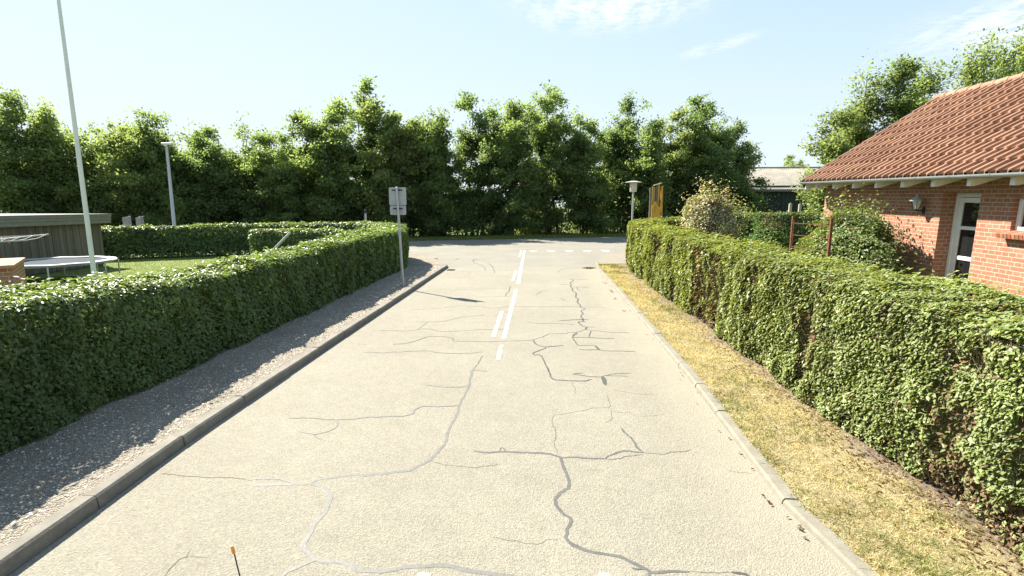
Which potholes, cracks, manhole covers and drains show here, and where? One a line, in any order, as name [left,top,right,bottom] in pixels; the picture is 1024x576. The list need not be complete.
crack [552,382,656,454]
